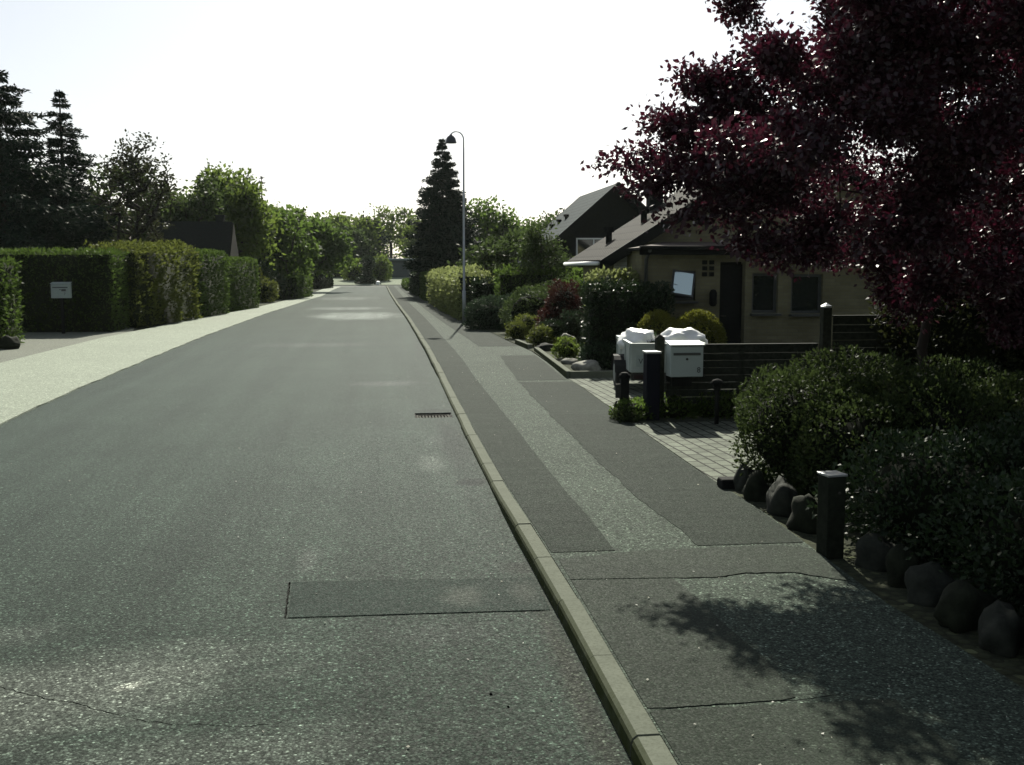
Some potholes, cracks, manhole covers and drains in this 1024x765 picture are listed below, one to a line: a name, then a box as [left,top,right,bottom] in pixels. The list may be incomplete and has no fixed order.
crack [2,687,296,727]
